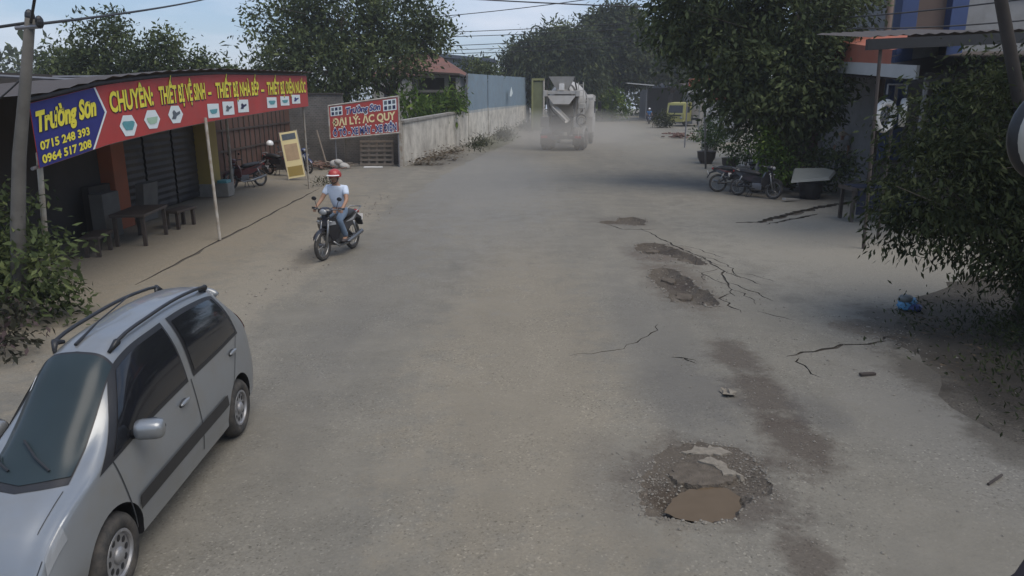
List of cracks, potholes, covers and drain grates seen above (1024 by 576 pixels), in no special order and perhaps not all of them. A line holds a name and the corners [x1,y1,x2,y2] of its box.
pothole [635,243,708,265]
crack [789,337,886,377]
crack [611,225,775,312]
pothole [639,441,773,523]
pothole [598,217,646,226]
crack [736,201,857,224]
pothole [648,267,720,306]
crack [570,325,658,356]
